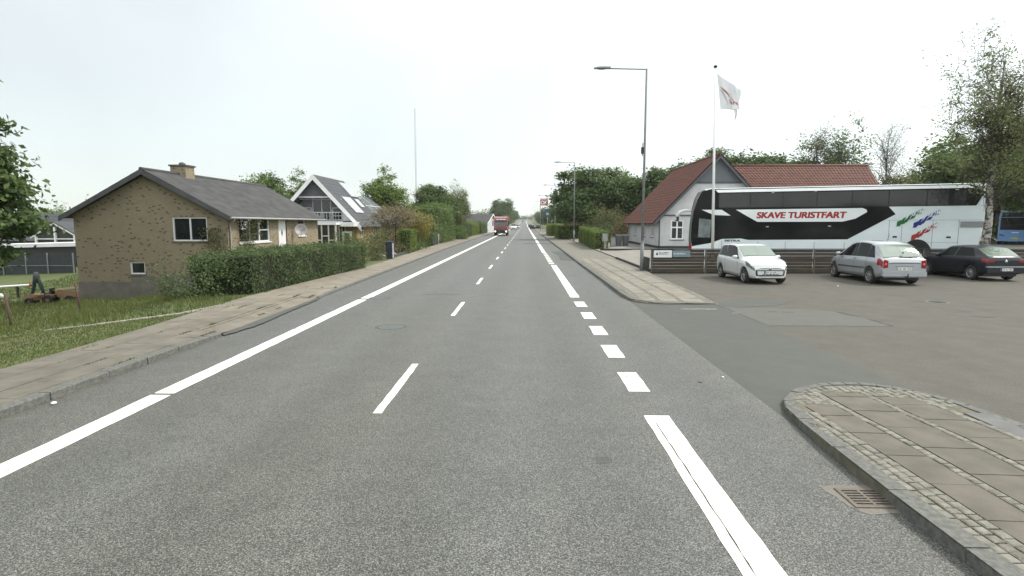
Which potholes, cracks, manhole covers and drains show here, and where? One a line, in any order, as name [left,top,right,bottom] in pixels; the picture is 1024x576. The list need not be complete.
drain grate [834,488,896,508]
